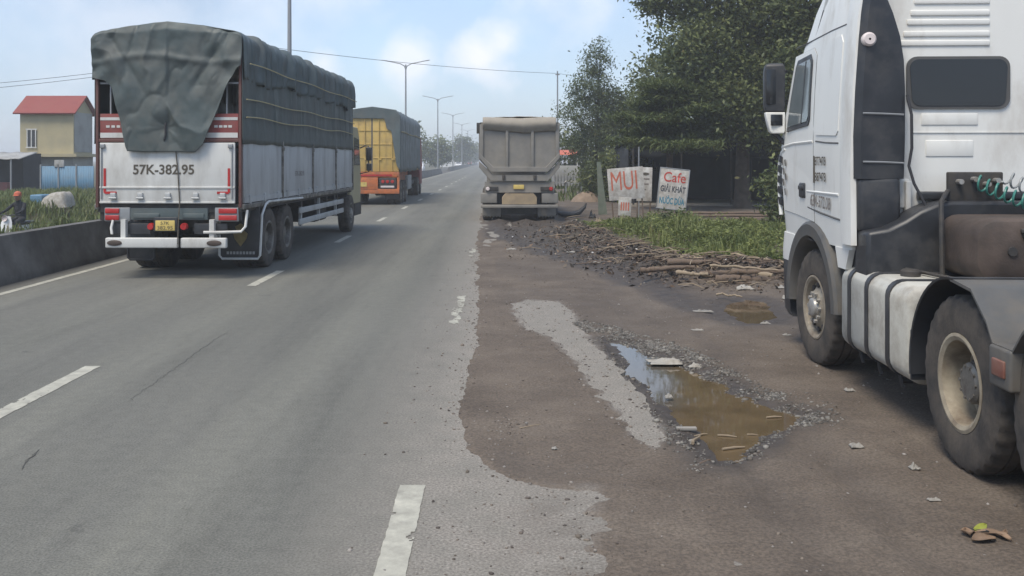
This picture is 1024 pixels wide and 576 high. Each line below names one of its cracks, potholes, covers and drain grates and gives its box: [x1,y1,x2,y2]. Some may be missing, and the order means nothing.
pothole [690,295,798,327]
pothole [593,335,826,474]
